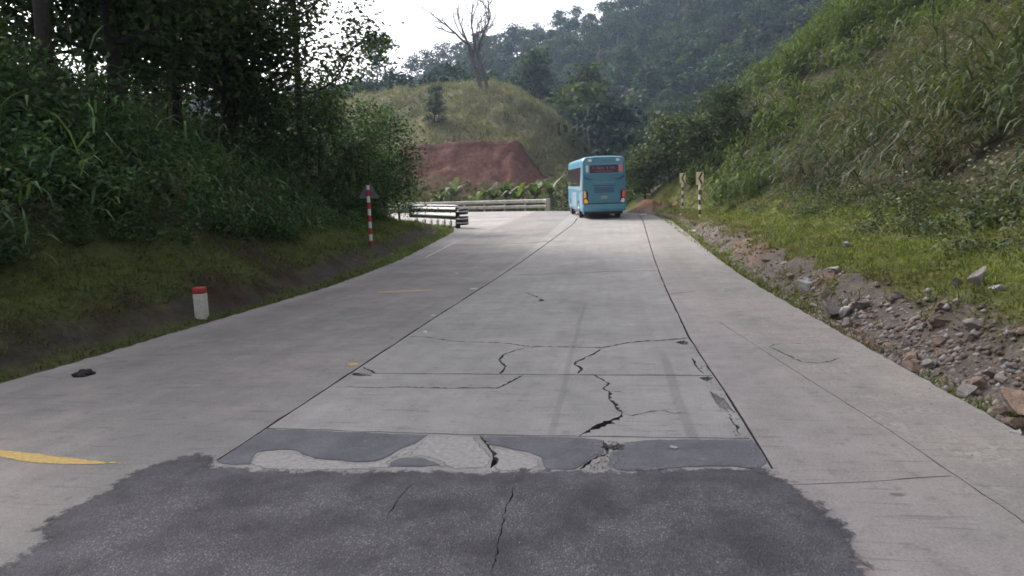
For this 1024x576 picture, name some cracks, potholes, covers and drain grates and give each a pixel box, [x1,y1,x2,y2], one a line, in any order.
crack [349,336,687,469]
